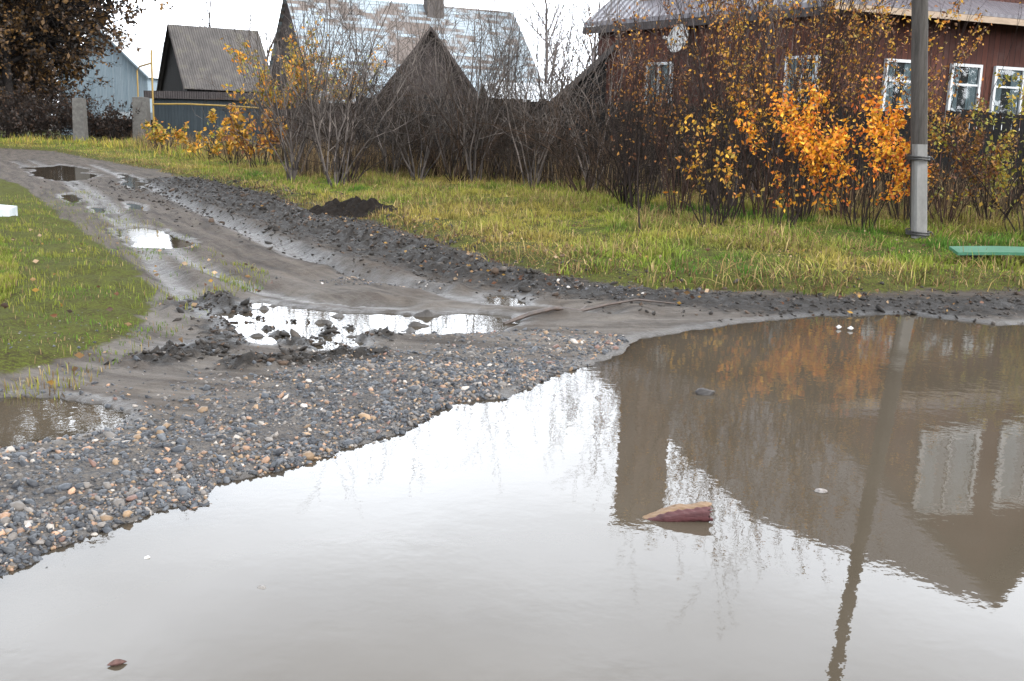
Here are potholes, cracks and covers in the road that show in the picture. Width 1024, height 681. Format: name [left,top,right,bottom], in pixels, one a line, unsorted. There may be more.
pothole [105,225,201,249]
pothole [0,308,1024,681]
pothole [198,297,532,352]
pothole [17,163,103,182]
pothole [55,192,91,203]
